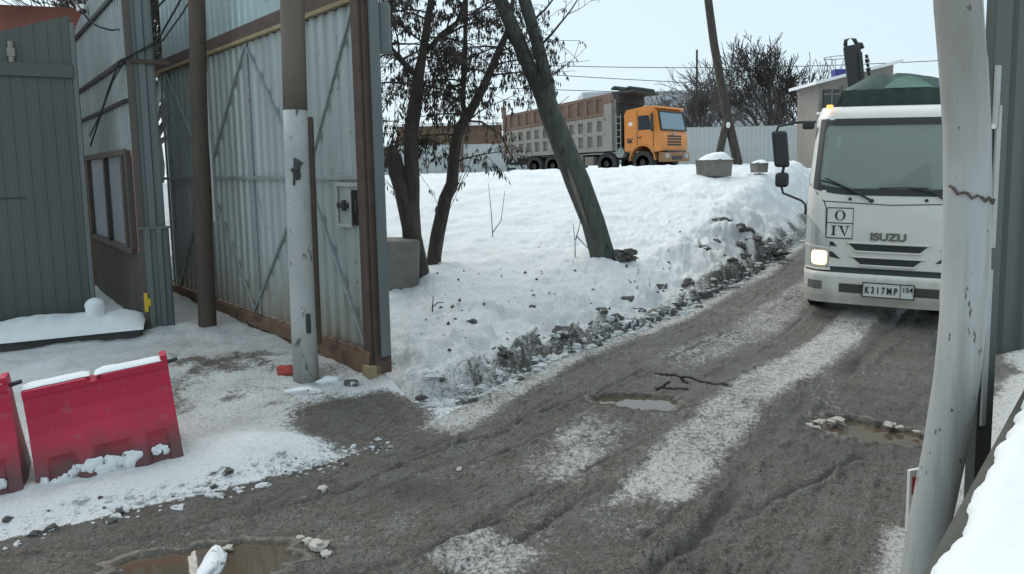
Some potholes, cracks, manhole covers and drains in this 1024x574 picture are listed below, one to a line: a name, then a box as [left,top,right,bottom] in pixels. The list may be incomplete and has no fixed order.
crack [655,373,728,391]
pothole [94,535,316,574]
pothole [803,410,925,449]
pothole [583,390,694,413]
